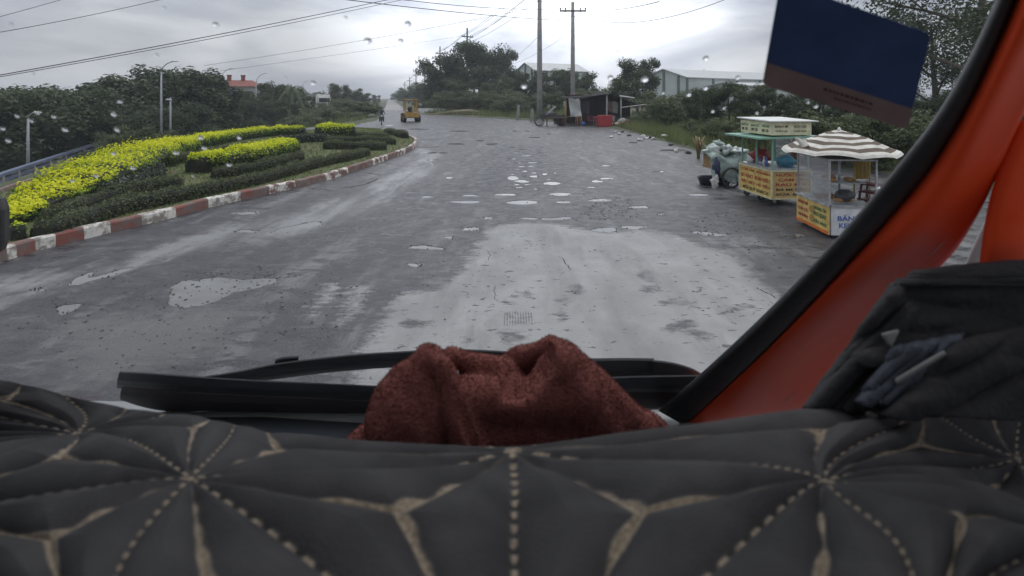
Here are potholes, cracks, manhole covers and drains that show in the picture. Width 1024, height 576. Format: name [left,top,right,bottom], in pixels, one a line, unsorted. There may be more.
pothole [68,267,133,286]
pothole [54,303,85,315]
pothole [163,276,280,309]
